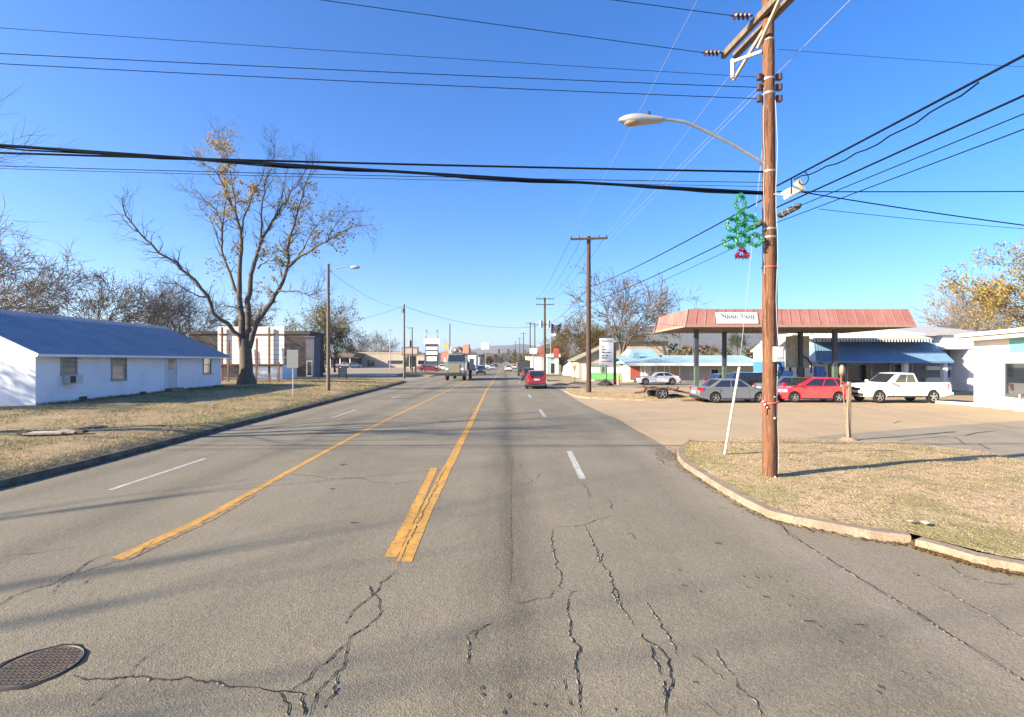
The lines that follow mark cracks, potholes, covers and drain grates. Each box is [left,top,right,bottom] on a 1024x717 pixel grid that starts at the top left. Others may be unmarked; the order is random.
crack [466,623,490,663]
crack [936,564,1024,638]
crack [694,650,762,716]
crack [73,570,396,715]
manhole cover [0,644,90,691]
crack [0,541,153,604]
crack [572,481,676,715]
crack [519,530,582,714]
